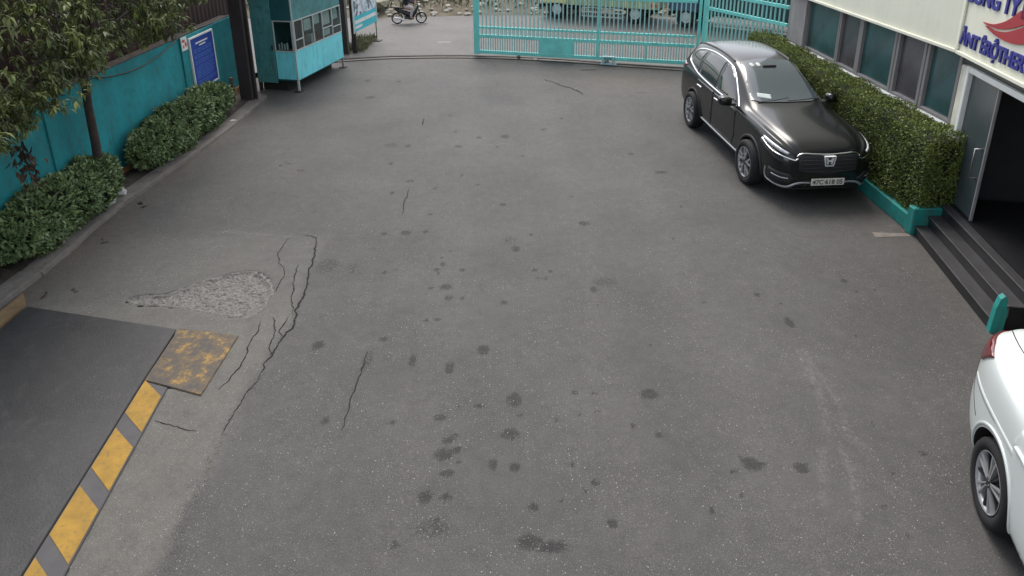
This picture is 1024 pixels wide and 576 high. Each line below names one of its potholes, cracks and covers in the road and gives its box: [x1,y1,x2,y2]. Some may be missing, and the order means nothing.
crack [342,352,368,428]
crack [220,235,317,432]
pothole [126,271,274,318]
